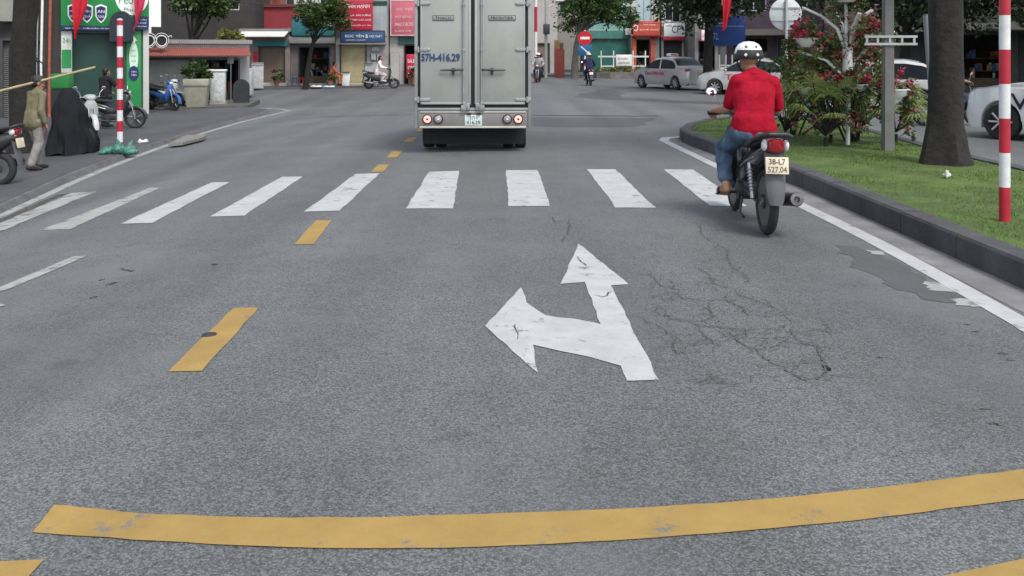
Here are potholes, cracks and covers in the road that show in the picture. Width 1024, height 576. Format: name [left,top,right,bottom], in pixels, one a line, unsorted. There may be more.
crack [624,223,852,397]
